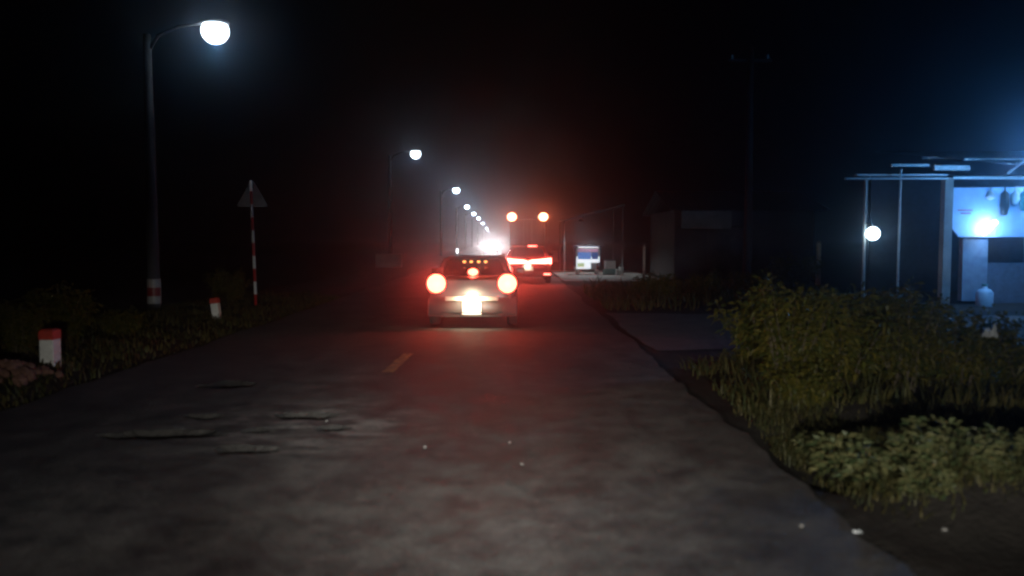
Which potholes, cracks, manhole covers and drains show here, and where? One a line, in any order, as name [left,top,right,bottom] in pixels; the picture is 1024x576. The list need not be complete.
pothole [193,380,257,389]
pothole [95,429,228,440]
pothole [273,412,340,420]
pothole [212,444,281,454]
